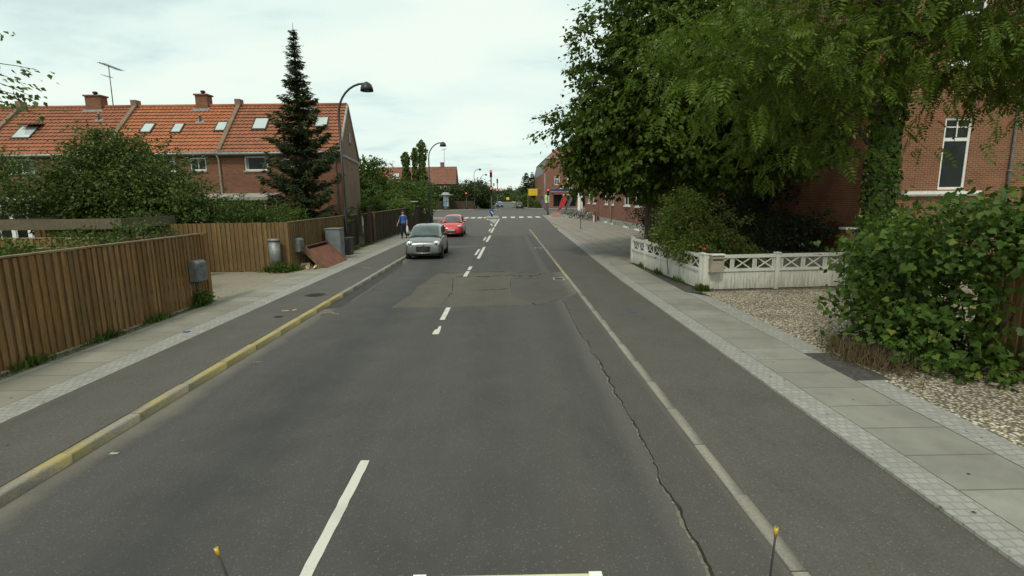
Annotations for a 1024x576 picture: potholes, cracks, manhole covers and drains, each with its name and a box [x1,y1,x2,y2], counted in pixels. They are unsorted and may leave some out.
crack [532,294,714,576]
